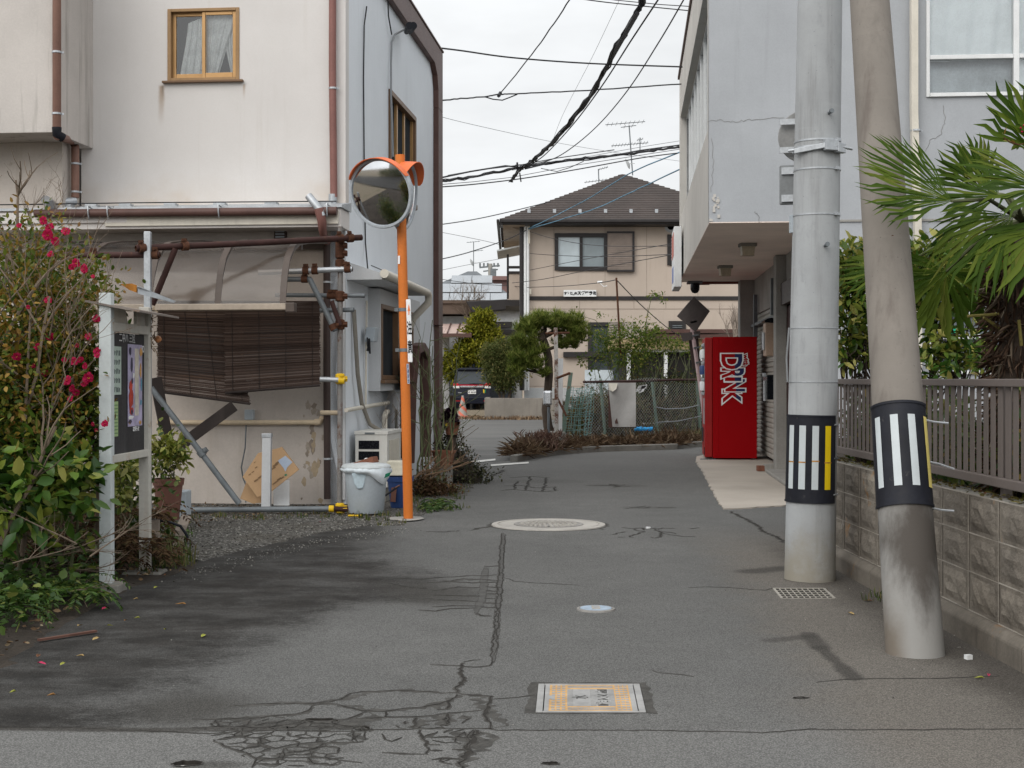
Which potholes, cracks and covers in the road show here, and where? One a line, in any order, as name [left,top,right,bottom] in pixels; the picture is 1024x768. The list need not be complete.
utility cover [577,605,615,613]
manhole cover [487,518,609,531]
crack [491,470,559,492]
crack [603,527,695,538]
drain grate [773,588,835,599]
crack [192,688,533,768]
